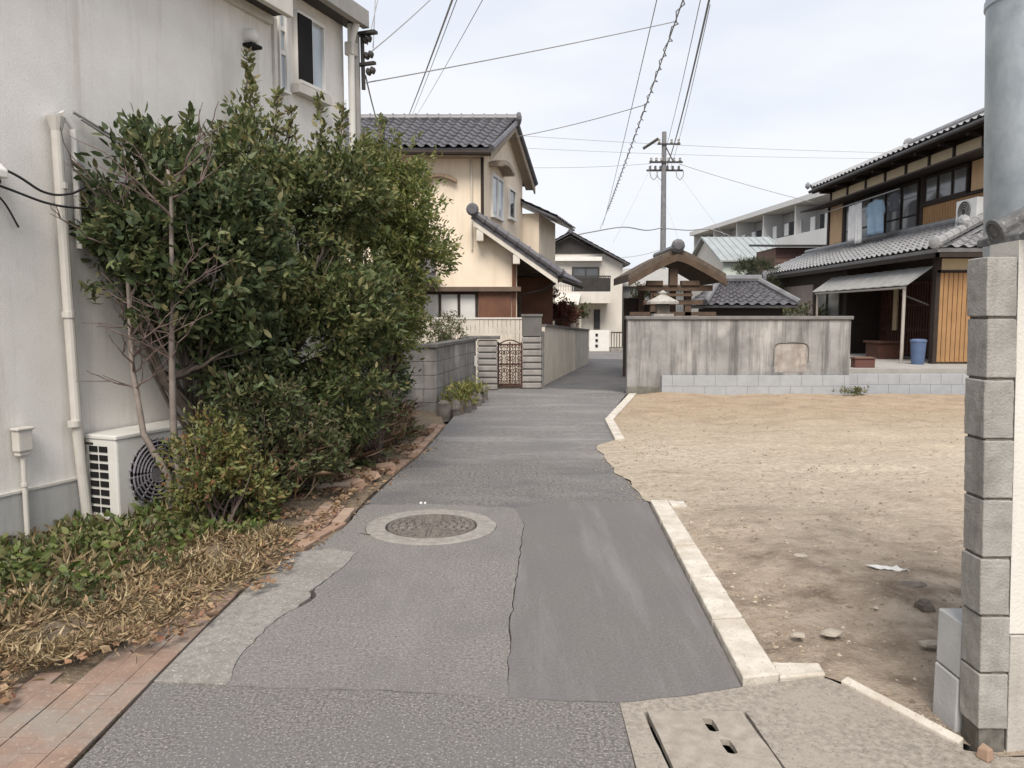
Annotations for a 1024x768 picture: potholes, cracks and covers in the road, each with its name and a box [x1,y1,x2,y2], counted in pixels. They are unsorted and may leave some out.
crack [507,529,524,675]
manhole cover [366,509,496,546]
